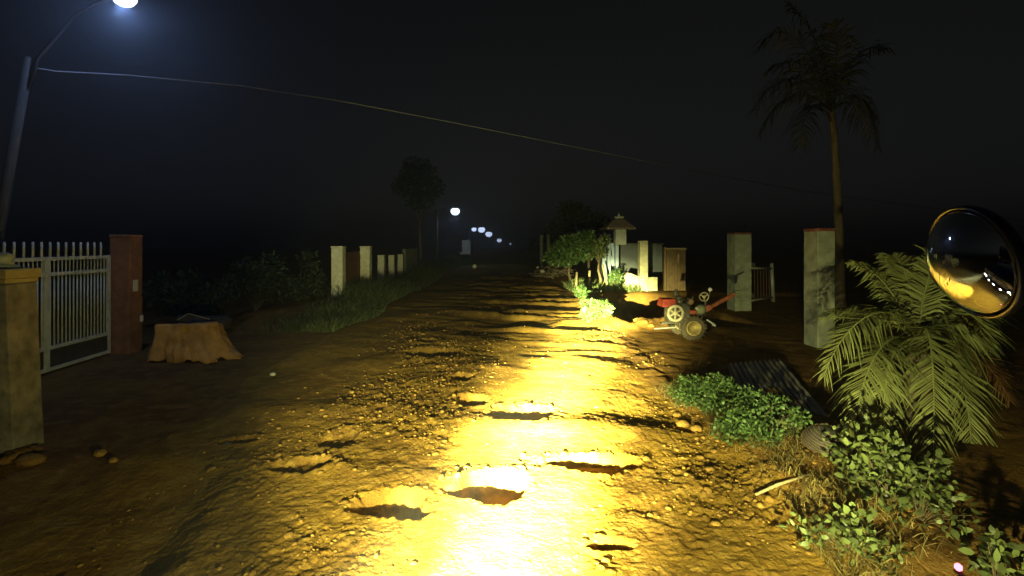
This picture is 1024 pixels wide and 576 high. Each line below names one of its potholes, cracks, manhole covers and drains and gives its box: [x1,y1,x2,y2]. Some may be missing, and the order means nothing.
pothole [347,485,433,521]
pothole [584,535,639,551]
pothole [268,454,336,474]
pothole [452,392,489,407]
pothole [441,466,531,506]
pothole [529,452,644,475]
pothole [484,402,557,421]
pothole [215,434,260,445]
